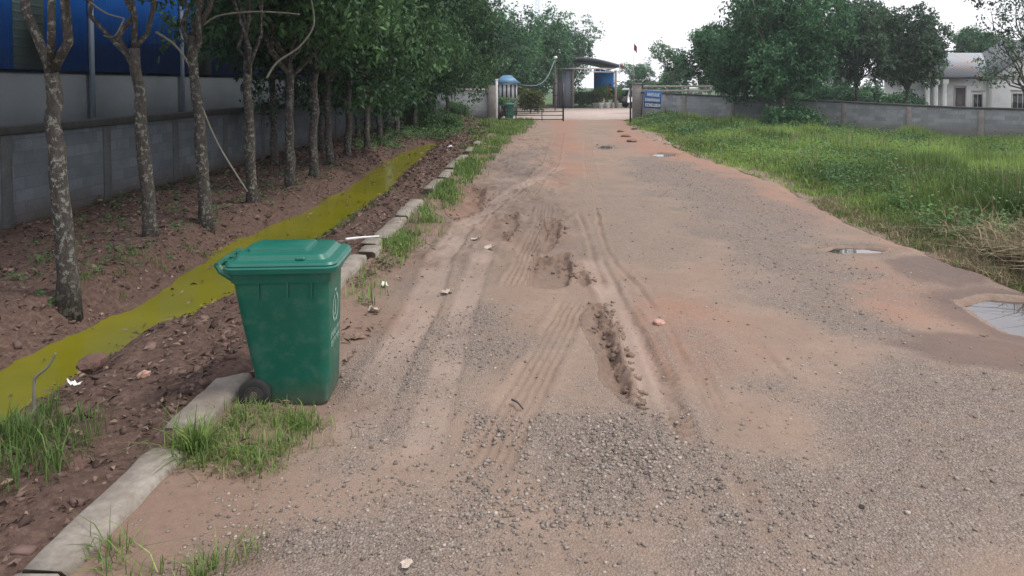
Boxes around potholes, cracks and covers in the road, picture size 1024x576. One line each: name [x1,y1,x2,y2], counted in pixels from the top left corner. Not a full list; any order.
pothole [525,251,579,289]
pothole [952,293,1024,338]
pothole [579,301,650,410]
pothole [816,245,892,255]
pothole [569,270,597,288]
